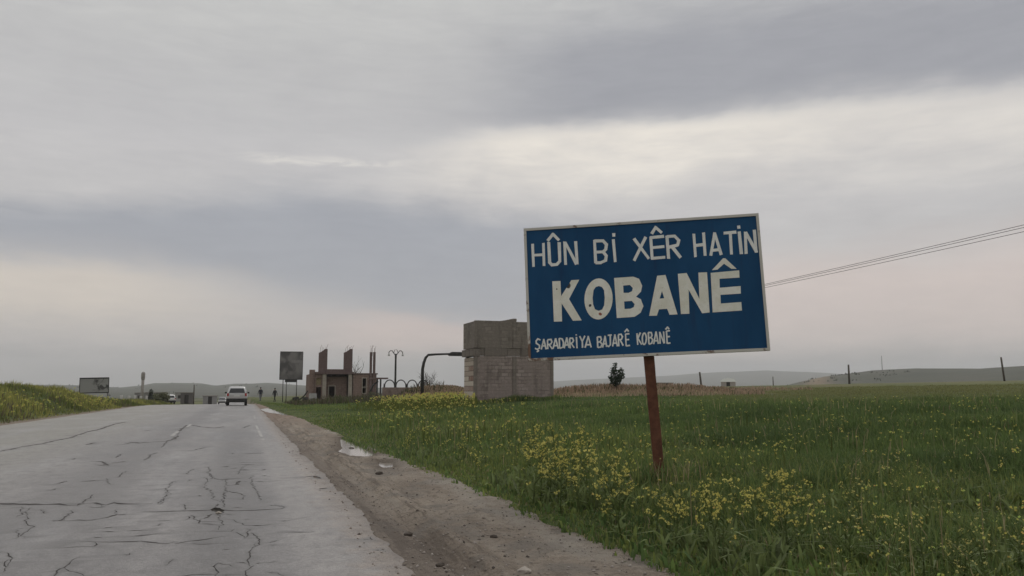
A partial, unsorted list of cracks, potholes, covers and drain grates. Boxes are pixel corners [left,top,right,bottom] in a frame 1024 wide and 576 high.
crack [0,422,283,576]
